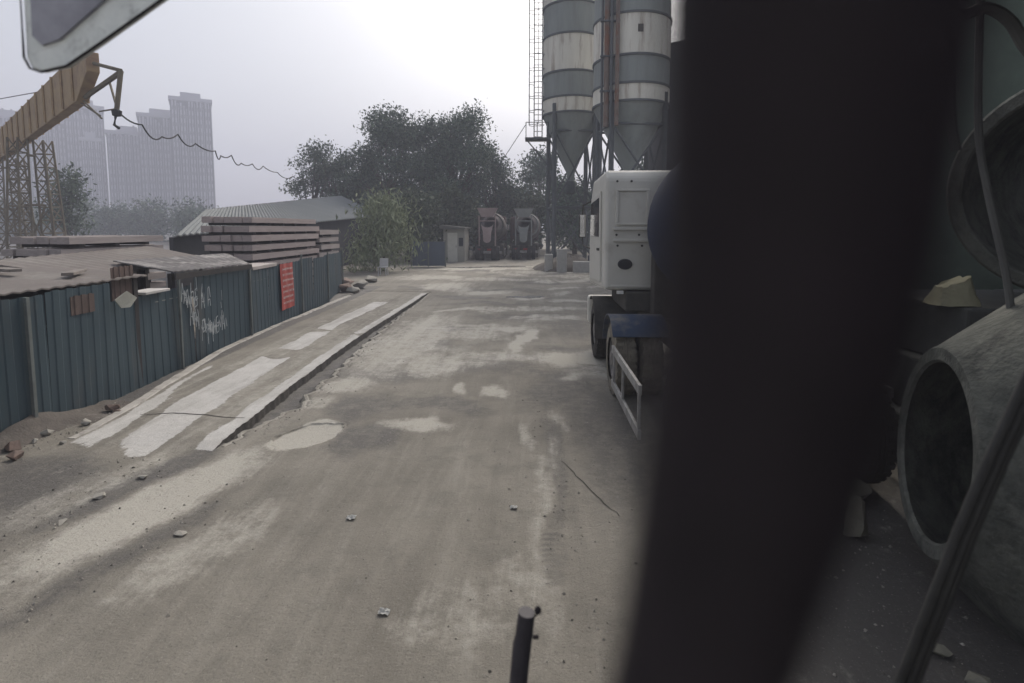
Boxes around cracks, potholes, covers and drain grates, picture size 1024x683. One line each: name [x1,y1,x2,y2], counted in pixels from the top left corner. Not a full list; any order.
crack [562,461,619,515]
